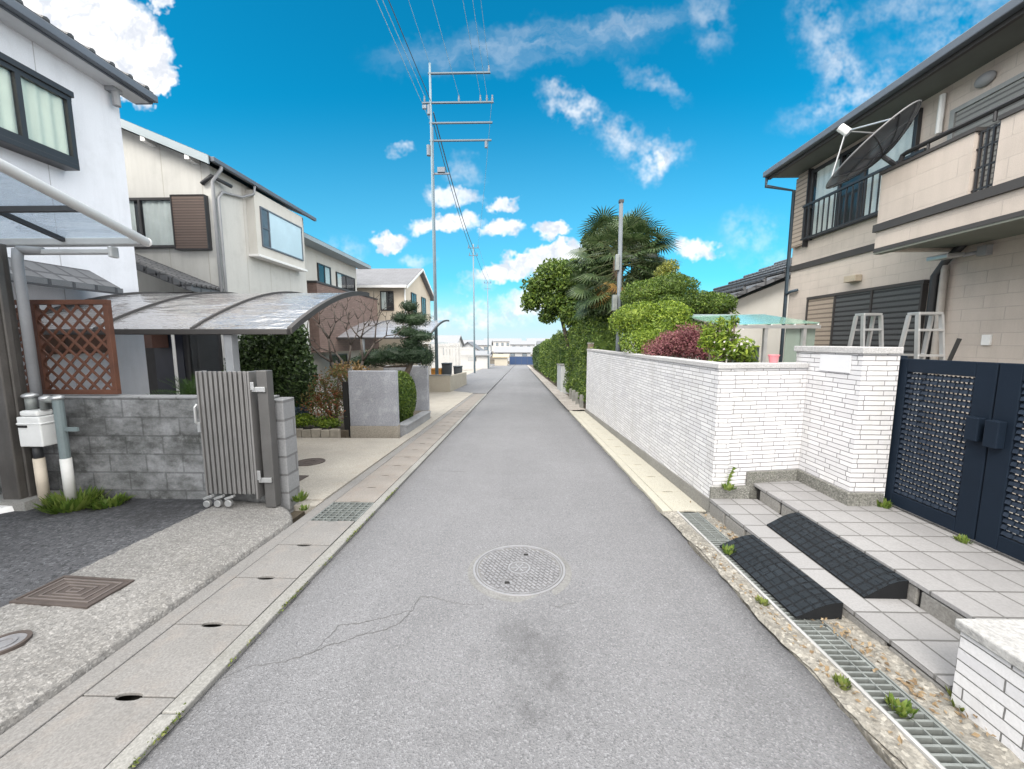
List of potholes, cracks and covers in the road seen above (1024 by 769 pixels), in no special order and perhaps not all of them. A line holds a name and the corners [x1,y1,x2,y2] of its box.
manhole cover [9,575,135,609]
drain grate [744,574,826,626]
manhole cover [0,630,33,655]
drain grate [310,502,374,523]
drain grate [797,625,989,769]
drain grate [681,513,726,539]
crack [221,596,484,679]
manhole cover [468,544,572,602]
manhole cover [298,458,326,466]
